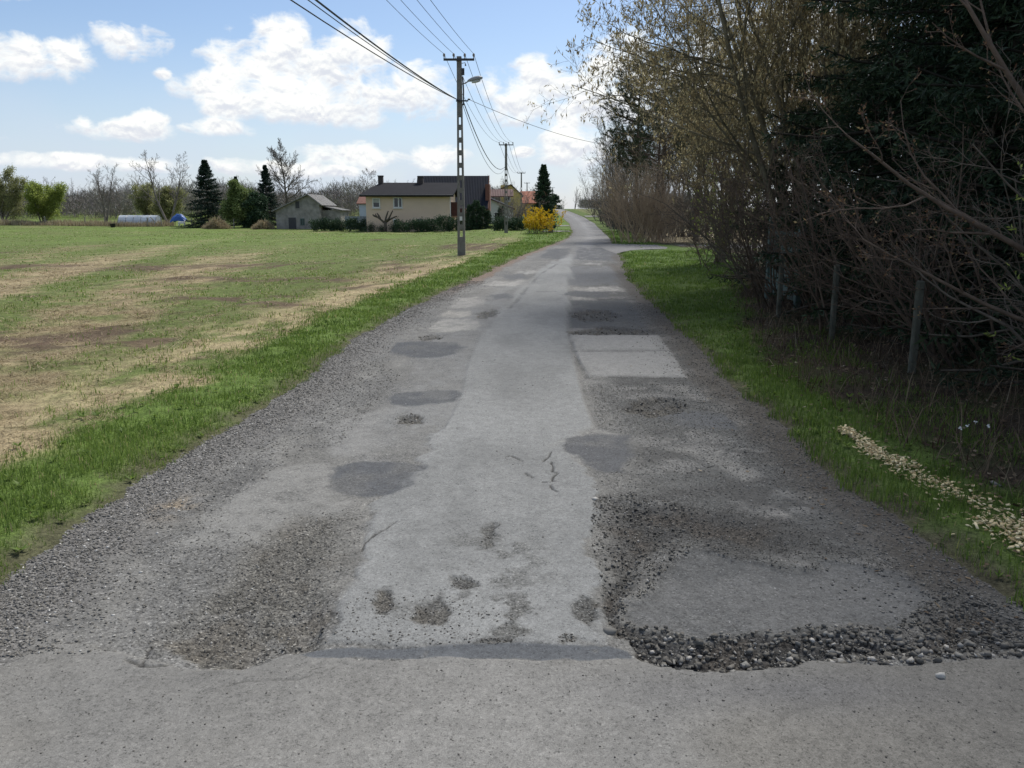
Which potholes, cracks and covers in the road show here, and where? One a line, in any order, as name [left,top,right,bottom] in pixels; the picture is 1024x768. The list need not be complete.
pothole [385,411,431,428]
pothole [127,507,370,672]
crack [504,451,560,492]
pothole [446,573,484,593]
pothole [469,308,504,319]
pothole [617,395,700,420]
crack [359,521,398,553]
pothole [406,594,456,629]
pothole [567,309,629,324]
pothole [585,492,1024,674]
pothole [563,592,605,628]
pothole [367,584,401,617]
